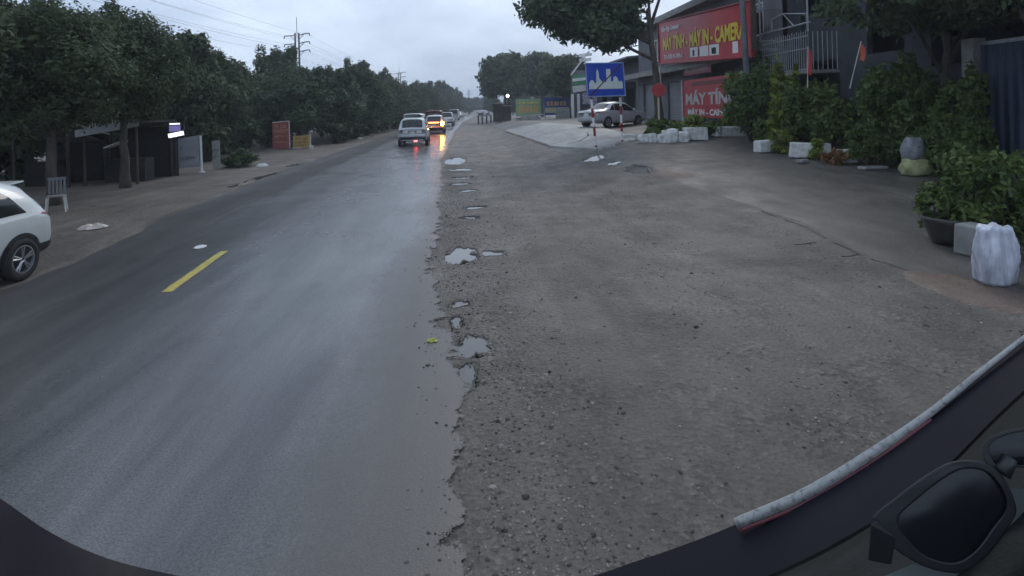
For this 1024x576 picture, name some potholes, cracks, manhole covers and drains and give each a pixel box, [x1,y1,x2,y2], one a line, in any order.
pothole [440,156,469,166]
crack [762,211,909,271]
pothole [448,331,495,361]
pothole [455,359,480,401]
pothole [470,249,509,257]
pothole [448,298,472,309]
pothole [580,153,607,163]
pothole [448,313,463,330]
pothole [436,244,485,267]
pothole [622,163,654,177]
